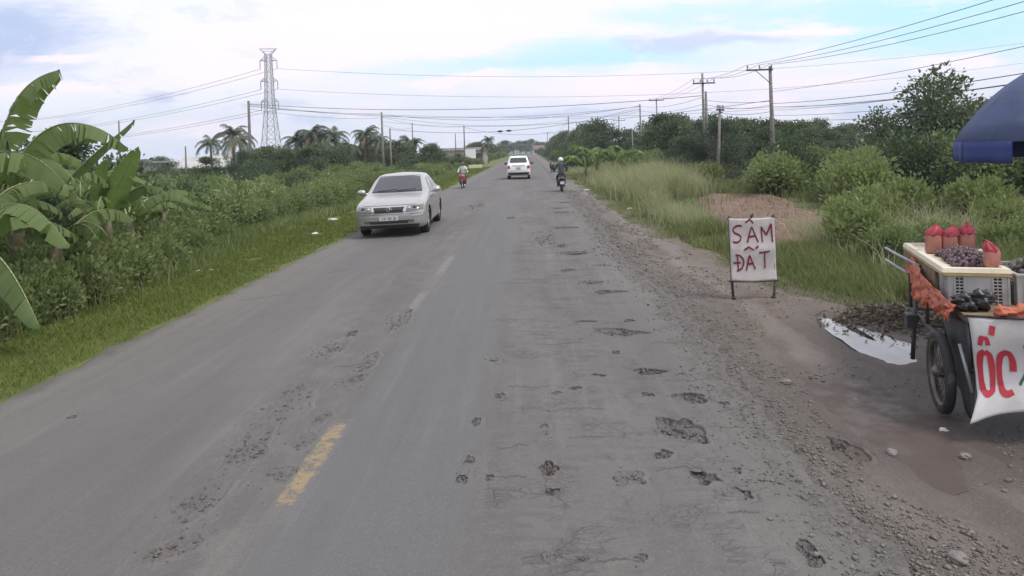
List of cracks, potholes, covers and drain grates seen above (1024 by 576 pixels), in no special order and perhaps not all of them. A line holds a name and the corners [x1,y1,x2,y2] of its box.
crack [592,555,643,568]
crack [496,442,528,451]
pothole [628,367,684,377]
pothole [341,329,361,341]
pothole [648,446,679,463]
pothole [347,349,385,378]
pothole [450,463,476,489]
pothole [537,484,566,500]
pothole [580,325,660,338]
pothole [532,456,566,481]
pothole [604,467,654,492]
pothole [818,430,877,468]
